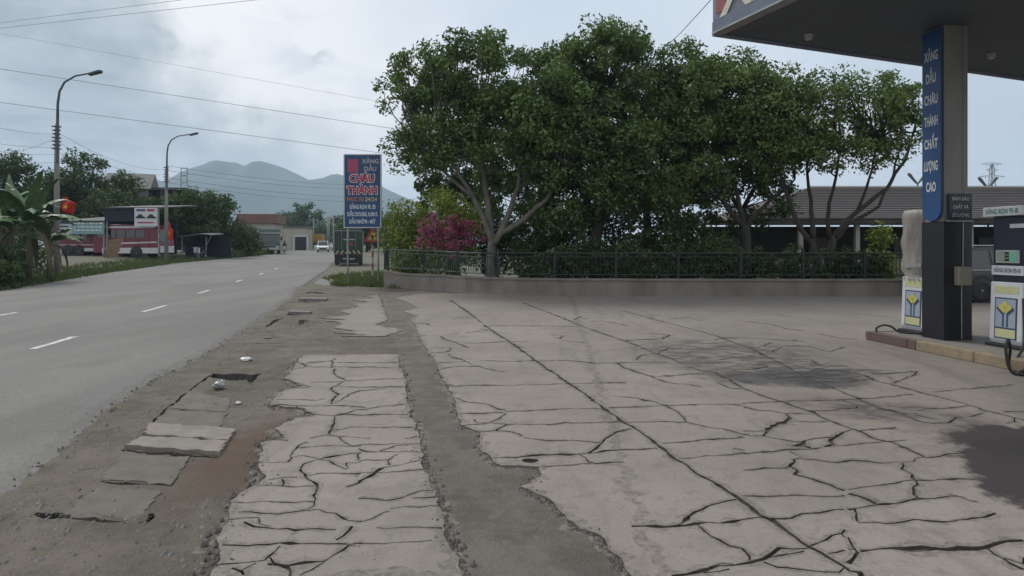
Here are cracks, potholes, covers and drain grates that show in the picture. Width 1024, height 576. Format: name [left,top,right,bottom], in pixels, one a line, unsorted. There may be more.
pothole [210,373,261,386]
crack [419,316,1024,576]
crack [217,356,442,576]
